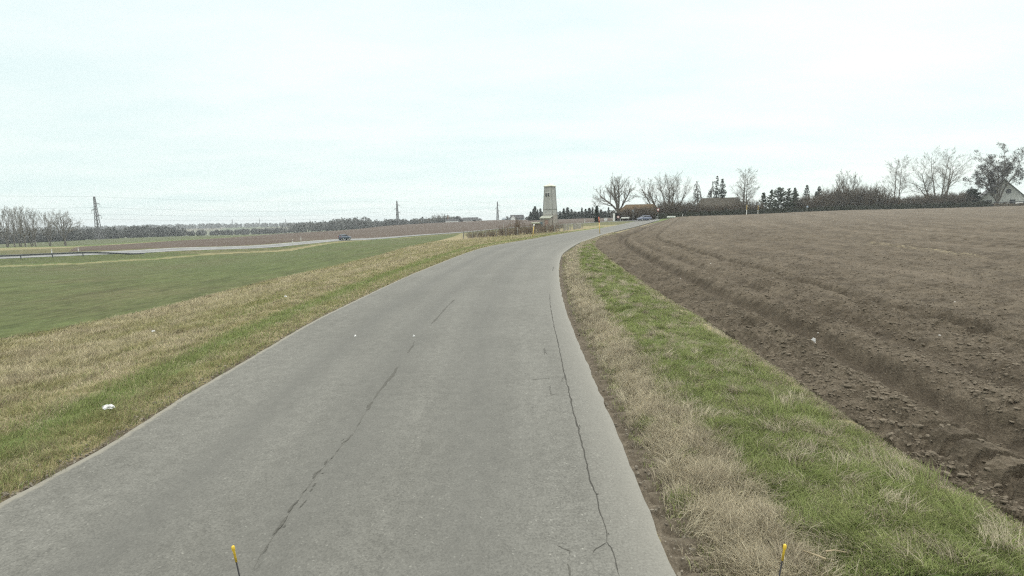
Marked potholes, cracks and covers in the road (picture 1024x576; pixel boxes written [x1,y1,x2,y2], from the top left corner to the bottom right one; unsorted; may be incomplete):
crack [252,342,414,571]
crack [532,302,619,574]
